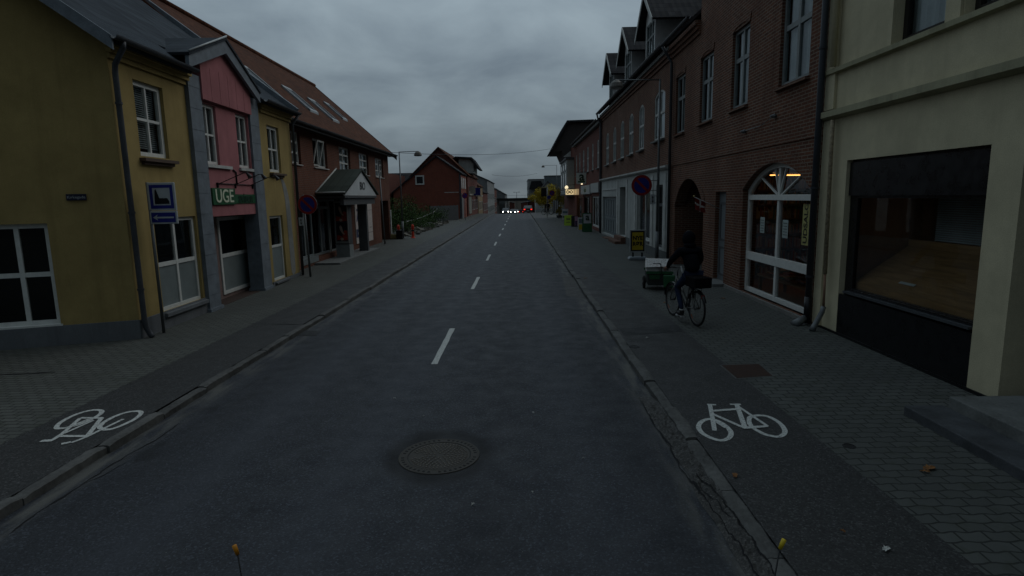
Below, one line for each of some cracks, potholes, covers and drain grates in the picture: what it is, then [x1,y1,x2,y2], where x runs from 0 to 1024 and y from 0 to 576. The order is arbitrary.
crack [641,401,774,576]
manhole cover [398,439,480,475]
manhole cover [720,363,774,379]
